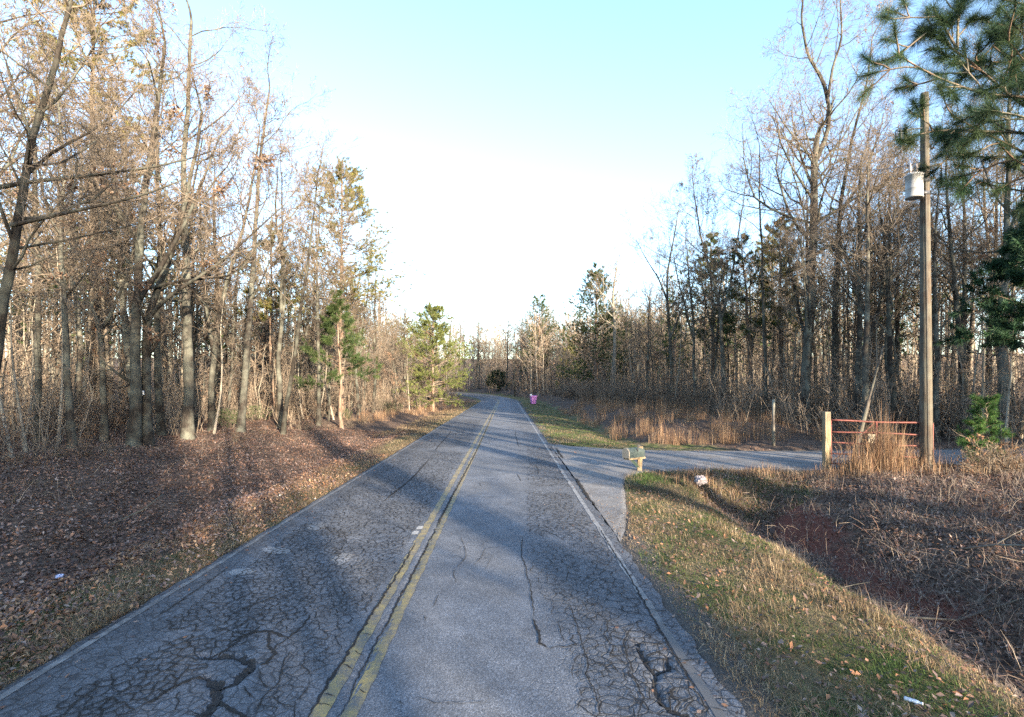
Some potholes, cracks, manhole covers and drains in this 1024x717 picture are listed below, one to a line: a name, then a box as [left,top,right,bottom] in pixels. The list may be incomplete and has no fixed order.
pothole [636,645,671,676]
crack [40,420,723,717]
